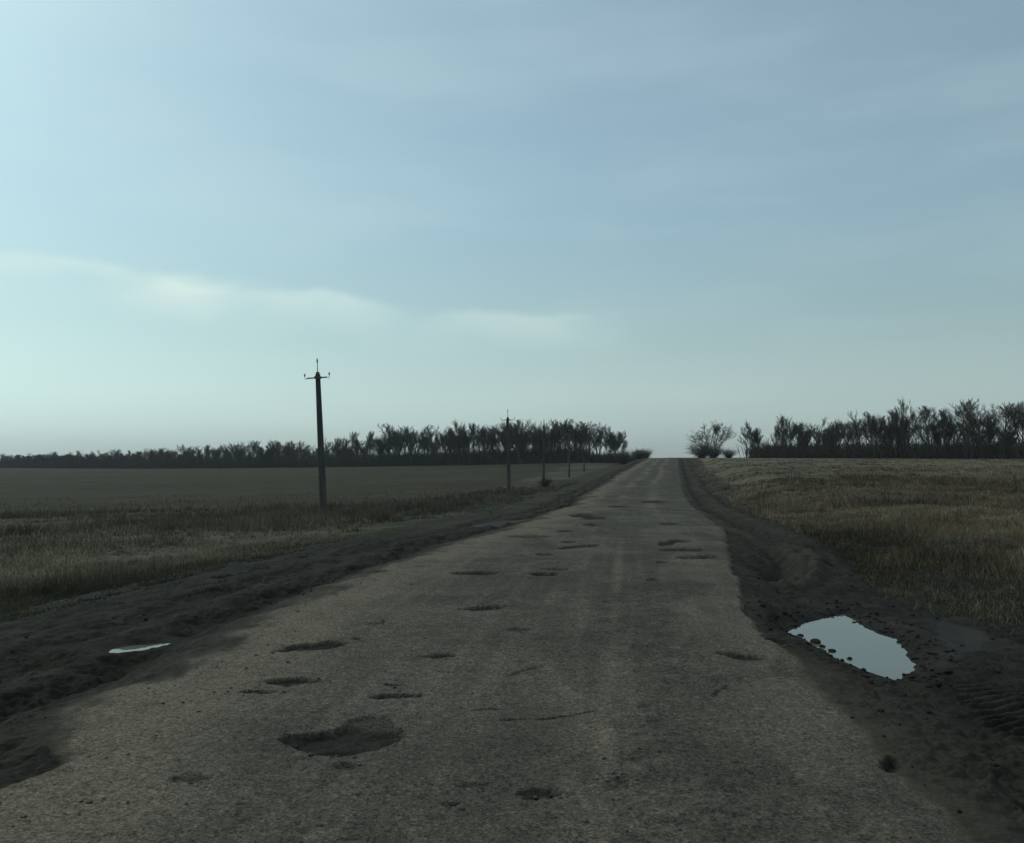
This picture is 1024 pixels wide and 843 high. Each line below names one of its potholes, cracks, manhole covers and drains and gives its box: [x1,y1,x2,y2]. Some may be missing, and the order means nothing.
pothole [272,714,409,758]
pothole [268,639,349,652]
pothole [511,786,569,801]
pothole [715,651,772,662]
pothole [261,676,328,688]
crack [472,707,599,722]
